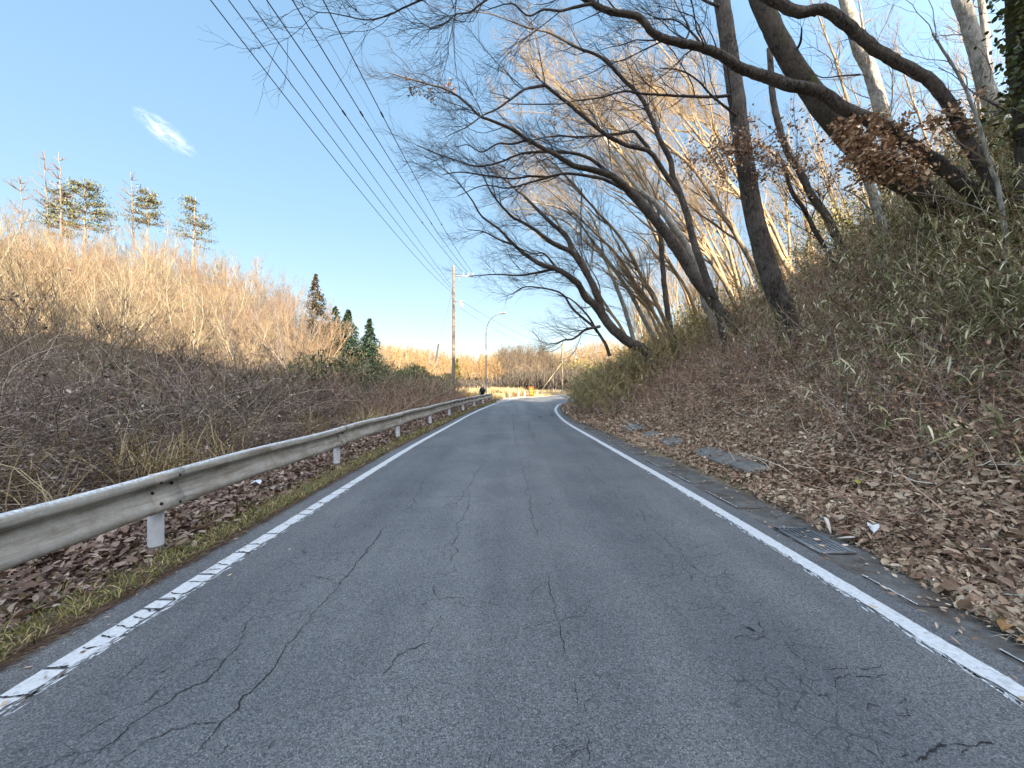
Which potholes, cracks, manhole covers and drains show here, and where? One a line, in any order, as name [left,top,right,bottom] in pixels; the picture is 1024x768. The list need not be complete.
crack [785,629,992,764]
crack [53,525,390,764]
crack [382,461,500,675]
drain grate [774,527,856,554]
